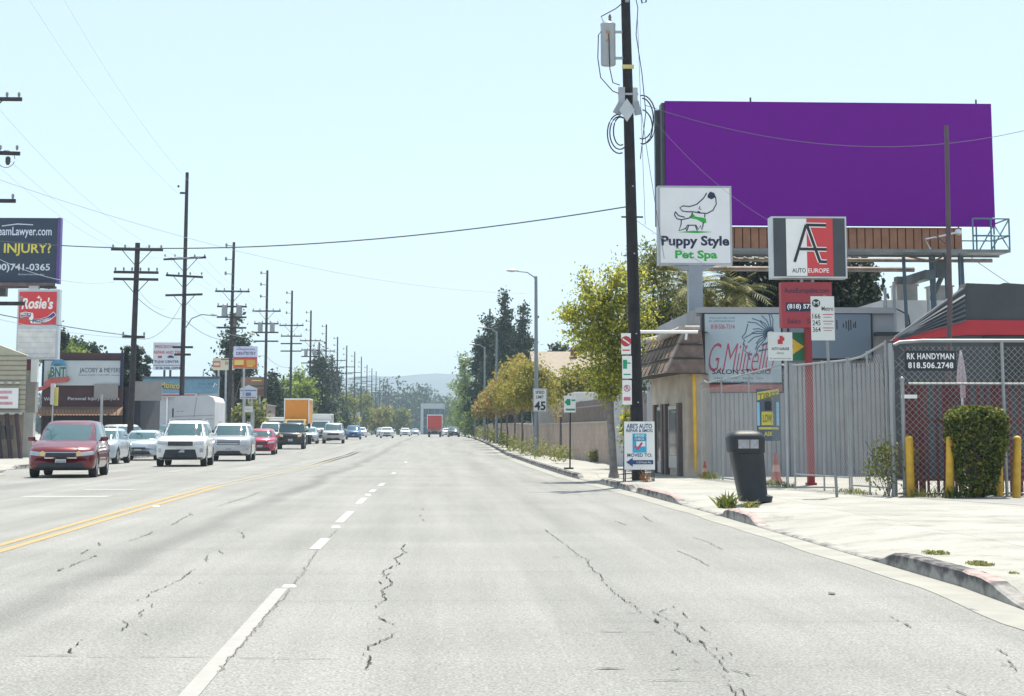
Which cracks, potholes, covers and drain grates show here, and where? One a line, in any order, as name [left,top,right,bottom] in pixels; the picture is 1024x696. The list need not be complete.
crack [122,532,245,635]
crack [363,544,407,670]
crack [545,529,757,696]
